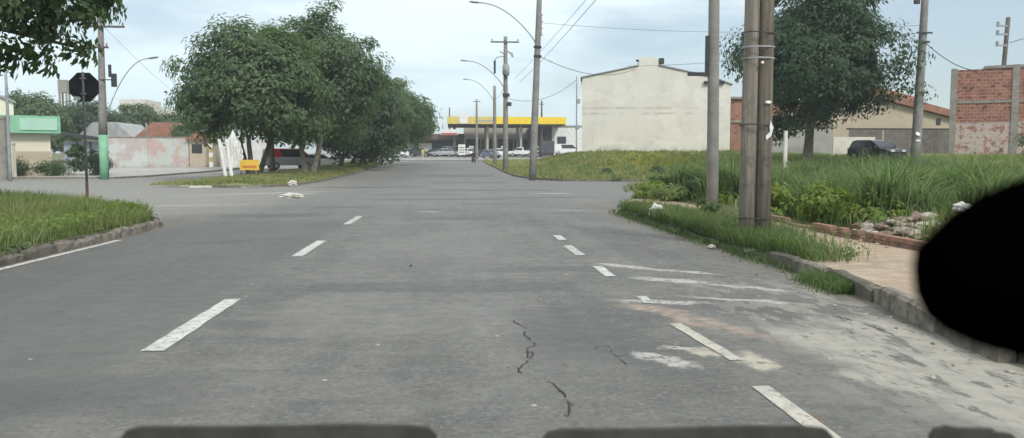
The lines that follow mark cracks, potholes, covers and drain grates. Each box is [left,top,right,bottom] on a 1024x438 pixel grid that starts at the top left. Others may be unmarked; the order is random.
crack [508,320,572,416]
